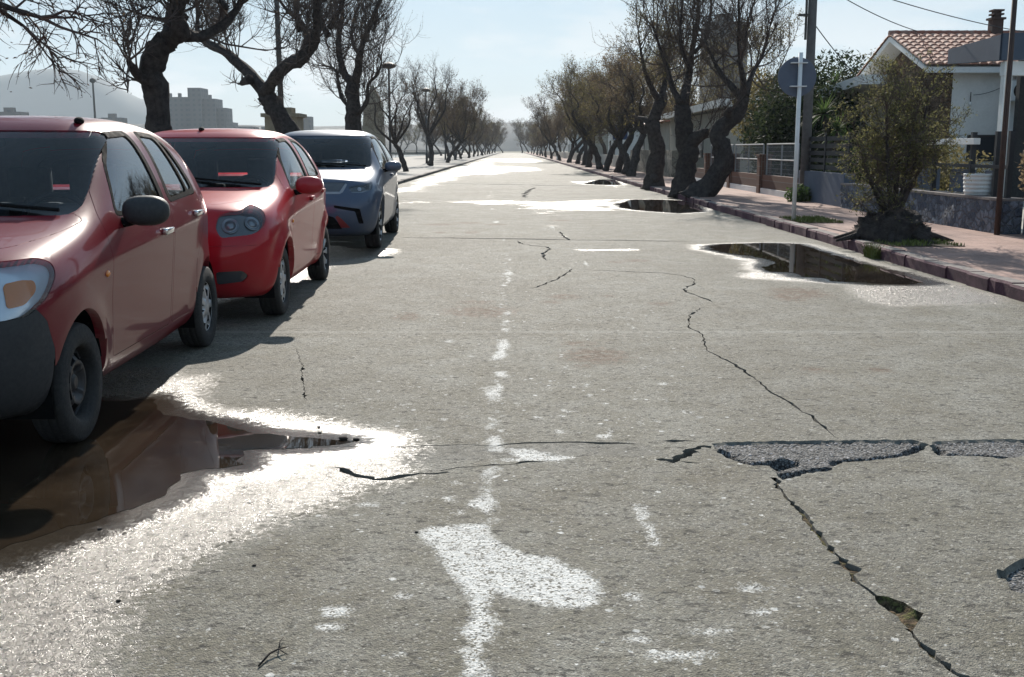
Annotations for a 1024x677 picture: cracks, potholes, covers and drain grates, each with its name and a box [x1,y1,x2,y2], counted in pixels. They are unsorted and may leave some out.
crack [911,629,970,677]
crack [297,353,307,399]
pothole [713,439,929,481]
crack [656,440,712,463]
crack [336,460,542,480]
pothole [996,558,1024,593]
pothole [929,439,1024,459]
crack [773,478,876,596]
crack [518,232,572,289]
crack [603,270,835,437]
